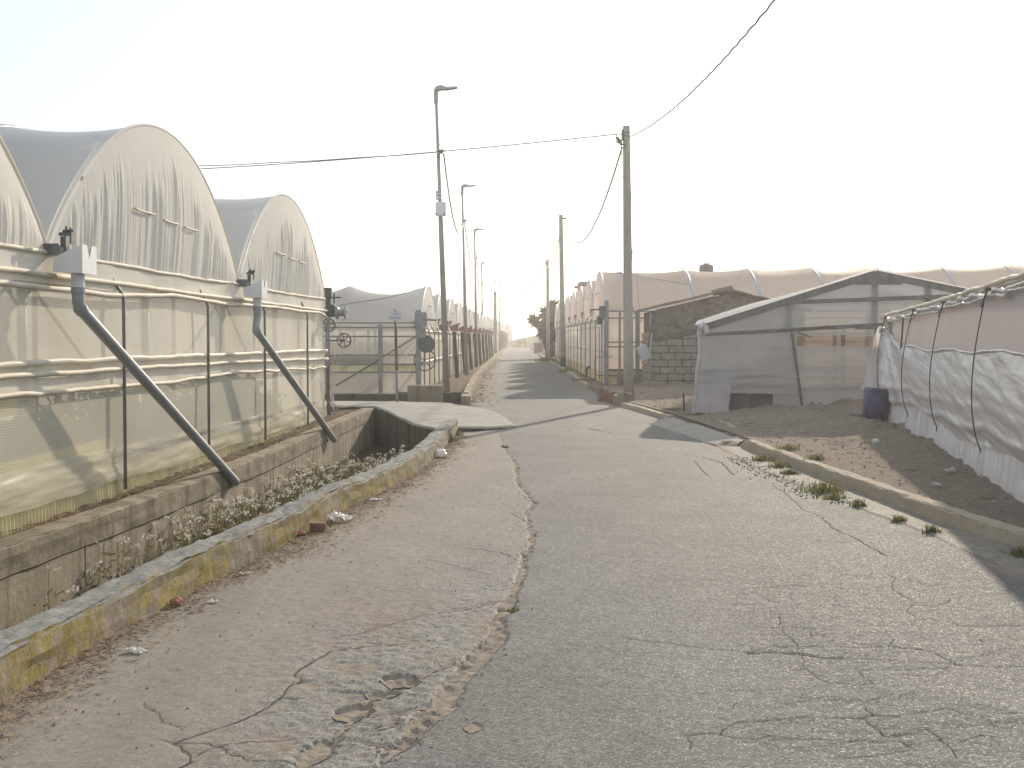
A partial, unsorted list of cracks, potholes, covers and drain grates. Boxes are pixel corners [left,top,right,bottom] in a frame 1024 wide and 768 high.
crack [685,679,1024,768]
crack [774,486,887,556]
crack [144,433,538,768]
crack [627,568,1021,685]
